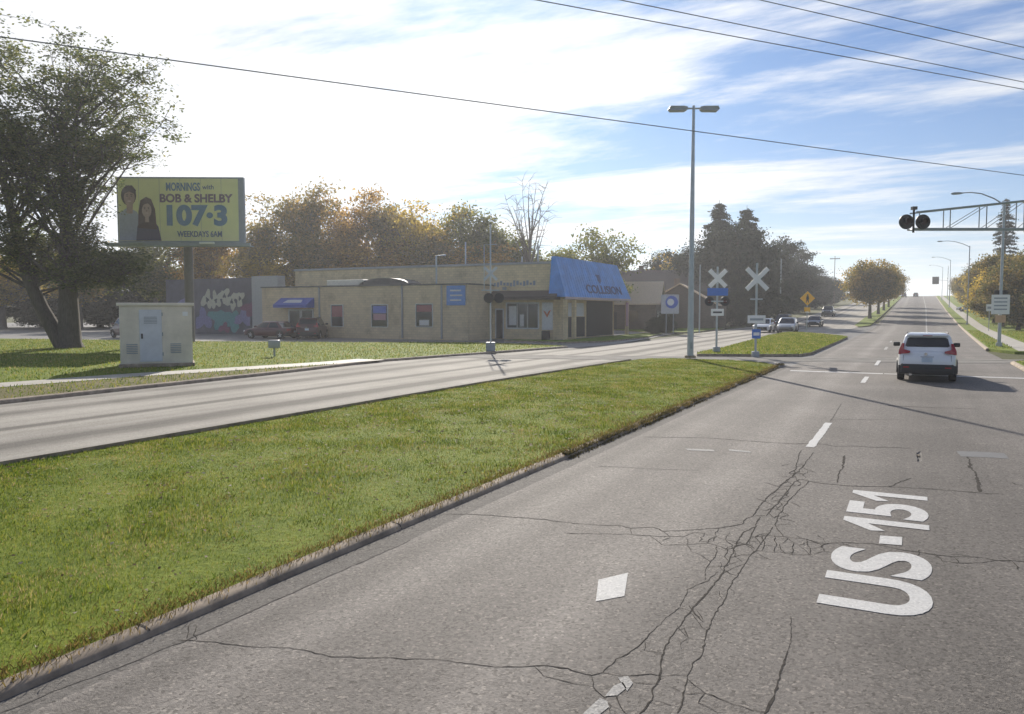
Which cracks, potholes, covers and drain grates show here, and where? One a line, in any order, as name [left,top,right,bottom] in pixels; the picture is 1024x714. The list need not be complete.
crack [187,437,1023,714]
